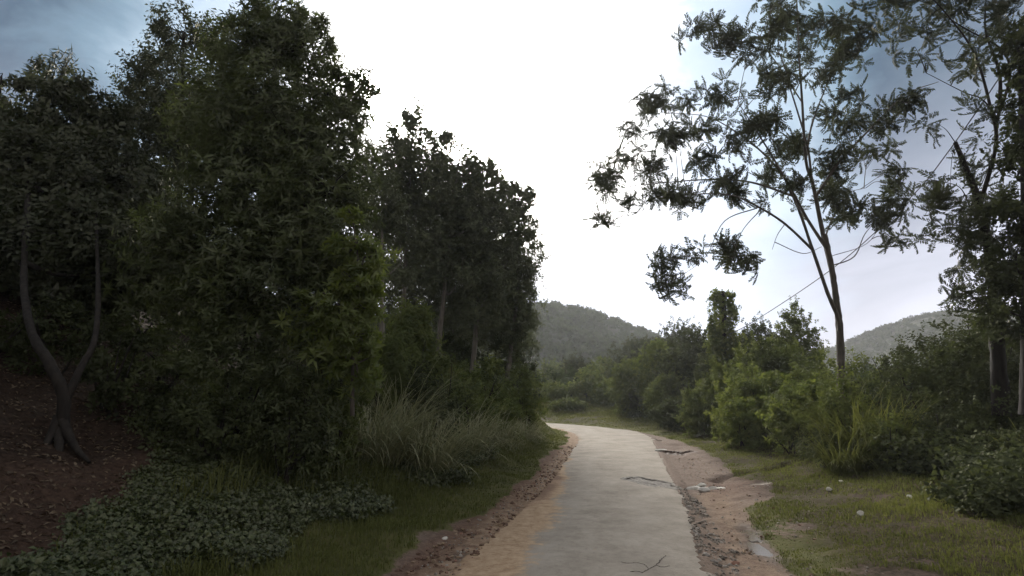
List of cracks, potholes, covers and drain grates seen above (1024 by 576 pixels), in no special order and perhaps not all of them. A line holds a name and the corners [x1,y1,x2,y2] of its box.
pothole [620,476,682,490]
